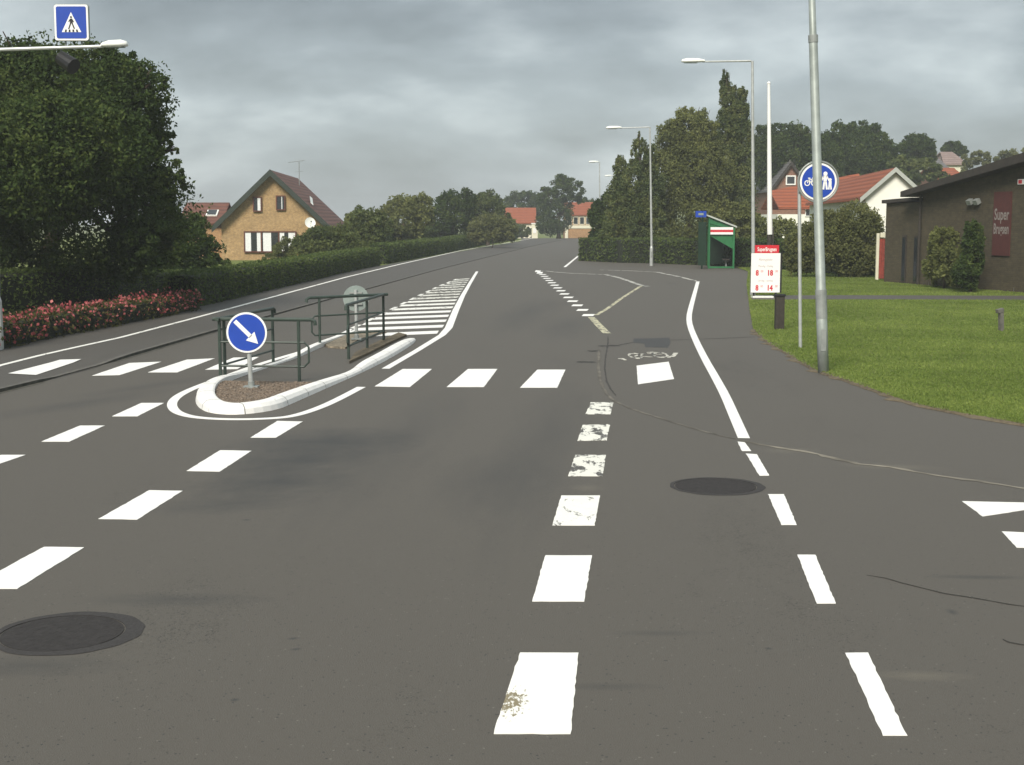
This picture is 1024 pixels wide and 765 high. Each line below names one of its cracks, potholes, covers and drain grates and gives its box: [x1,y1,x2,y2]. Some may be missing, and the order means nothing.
crack [869,575,1022,606]
manhole cover [0,611,145,655]
manhole cover [670,477,766,495]
